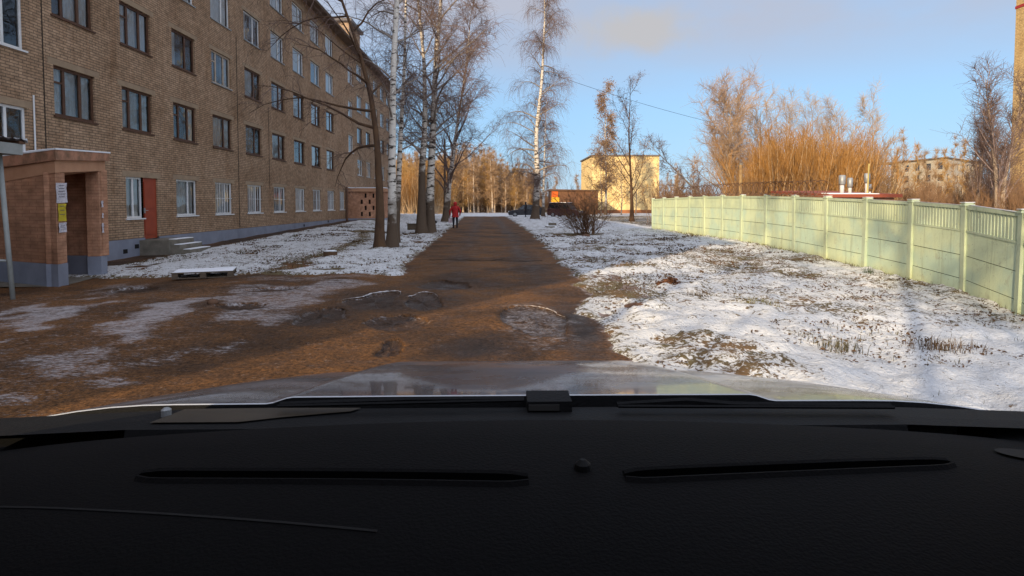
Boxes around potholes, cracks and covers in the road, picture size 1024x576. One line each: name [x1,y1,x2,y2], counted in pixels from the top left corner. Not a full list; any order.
pothole [489,304,579,340]
pothole [364,335,418,361]
pothole [330,289,409,311]
pothole [393,290,450,313]
pothole [348,312,441,334]
pothole [410,278,478,291]
